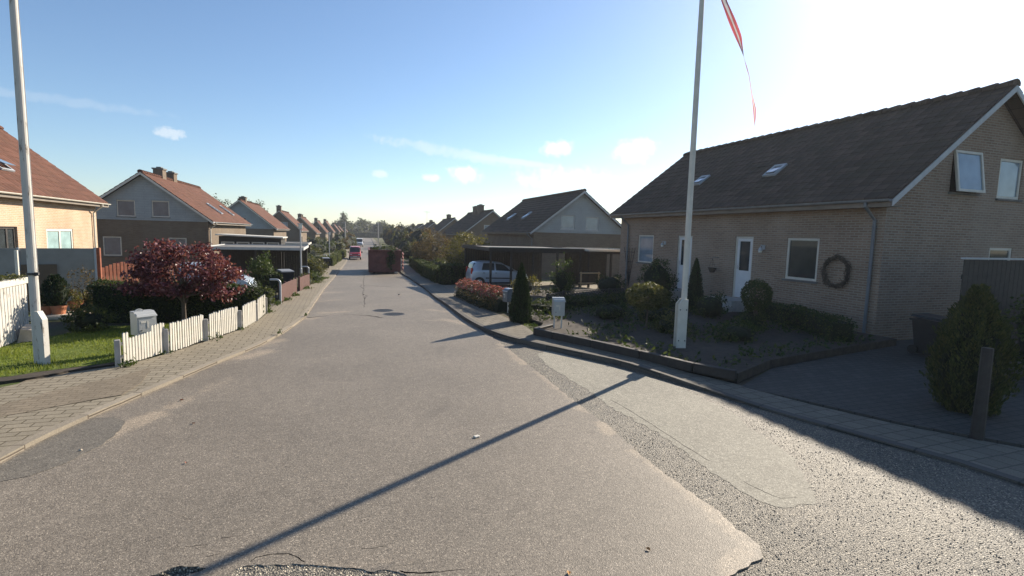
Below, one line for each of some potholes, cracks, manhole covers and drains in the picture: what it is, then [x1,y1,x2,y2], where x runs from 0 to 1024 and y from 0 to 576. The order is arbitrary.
pothole [231,564,407,576]
pothole [151,566,205,576]
